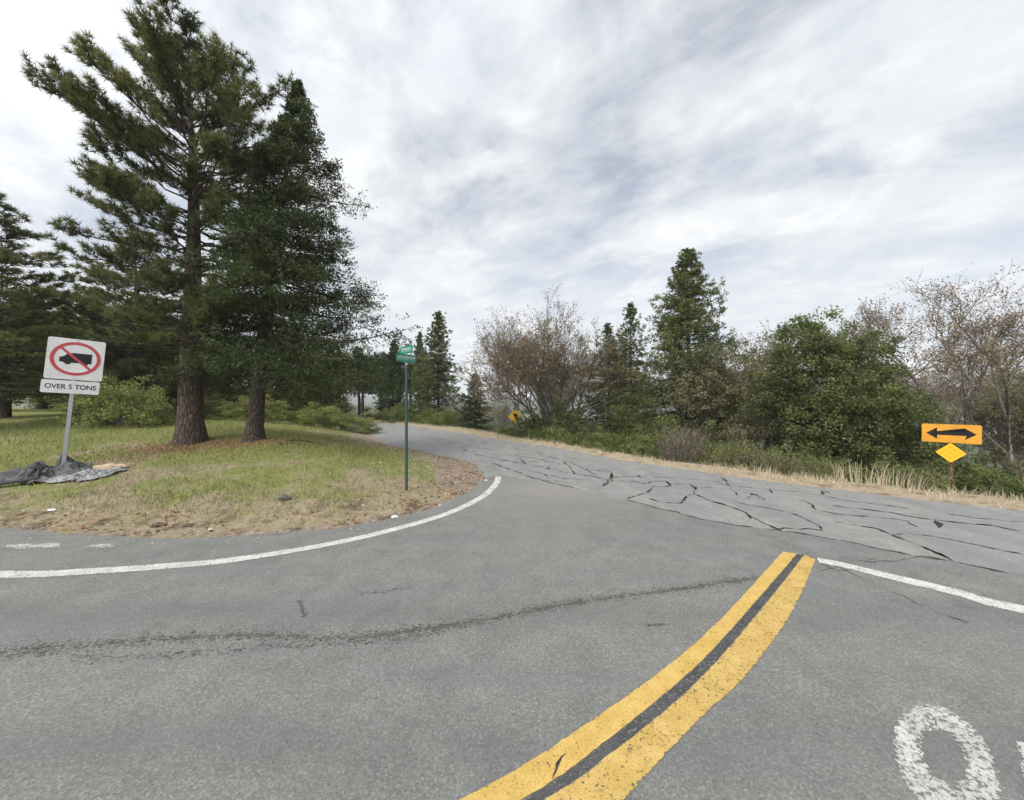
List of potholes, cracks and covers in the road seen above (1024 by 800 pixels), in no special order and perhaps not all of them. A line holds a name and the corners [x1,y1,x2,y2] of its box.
crack [538,752,581,779]
crack [423,436,1021,623]
